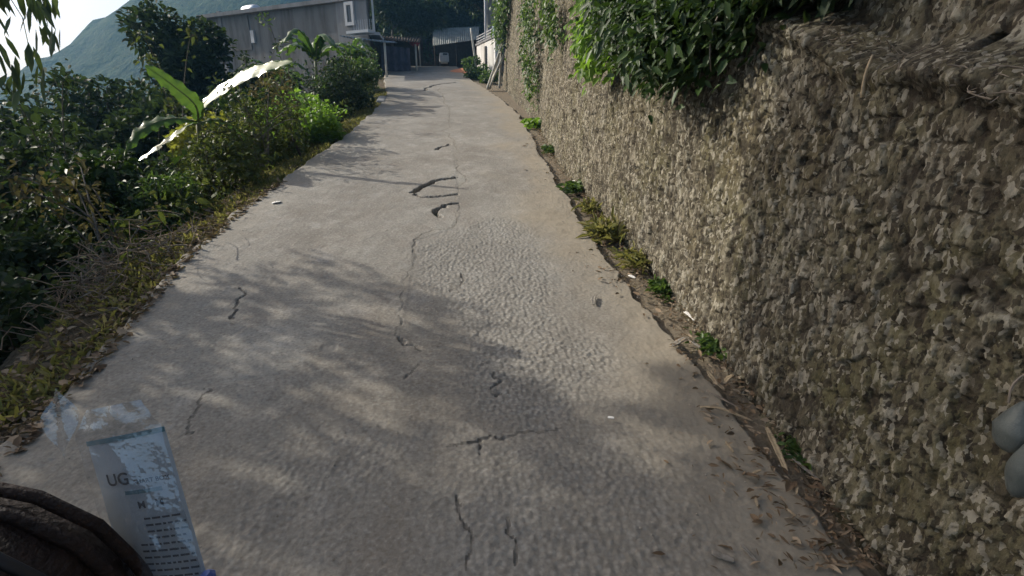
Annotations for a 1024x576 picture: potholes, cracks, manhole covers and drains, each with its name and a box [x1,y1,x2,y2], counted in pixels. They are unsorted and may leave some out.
crack [446,427,562,455]
crack [505,517,518,566]
crack [184,388,213,436]
crack [394,88,467,379]
crack [228,287,248,320]
crack [455,495,475,571]
